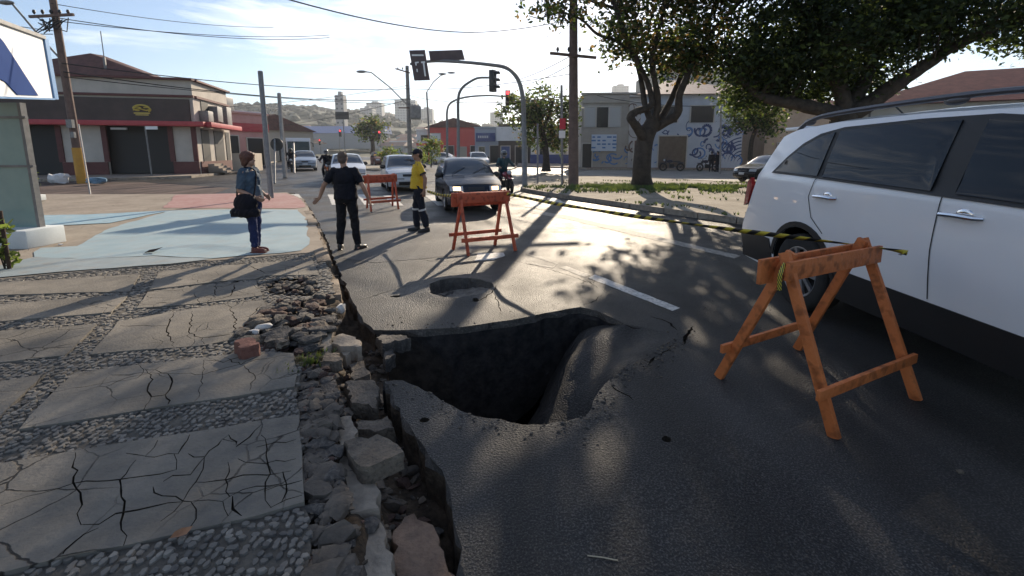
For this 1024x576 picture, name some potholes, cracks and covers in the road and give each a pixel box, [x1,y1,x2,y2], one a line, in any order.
crack [49,353,284,409]
crack [1,425,302,554]
crack [626,317,693,364]
crack [120,266,296,346]
